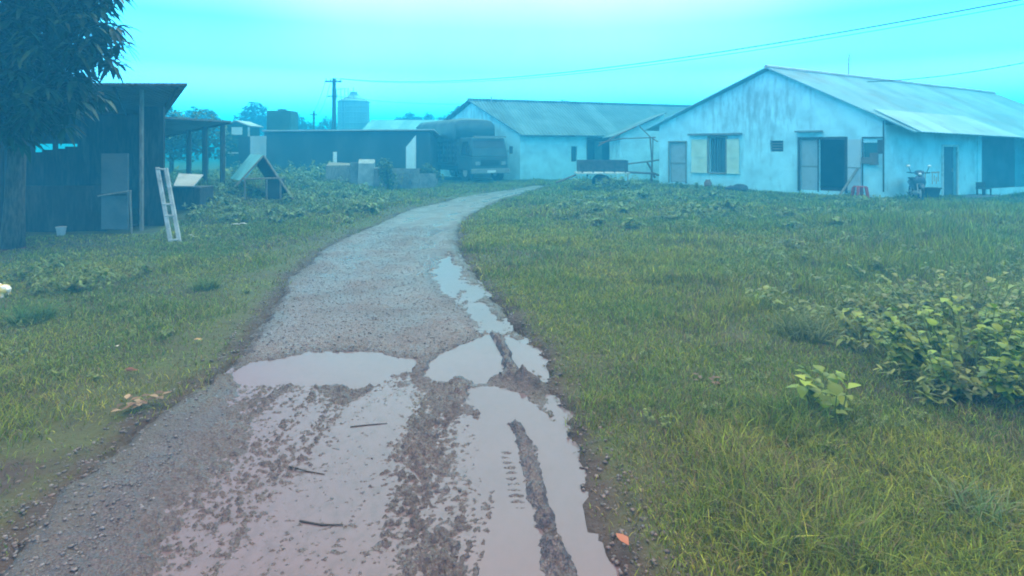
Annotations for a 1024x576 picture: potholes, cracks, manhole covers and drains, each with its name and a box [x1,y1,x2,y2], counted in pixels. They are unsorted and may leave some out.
pothole [226,346,421,391]
pothole [419,330,510,388]
